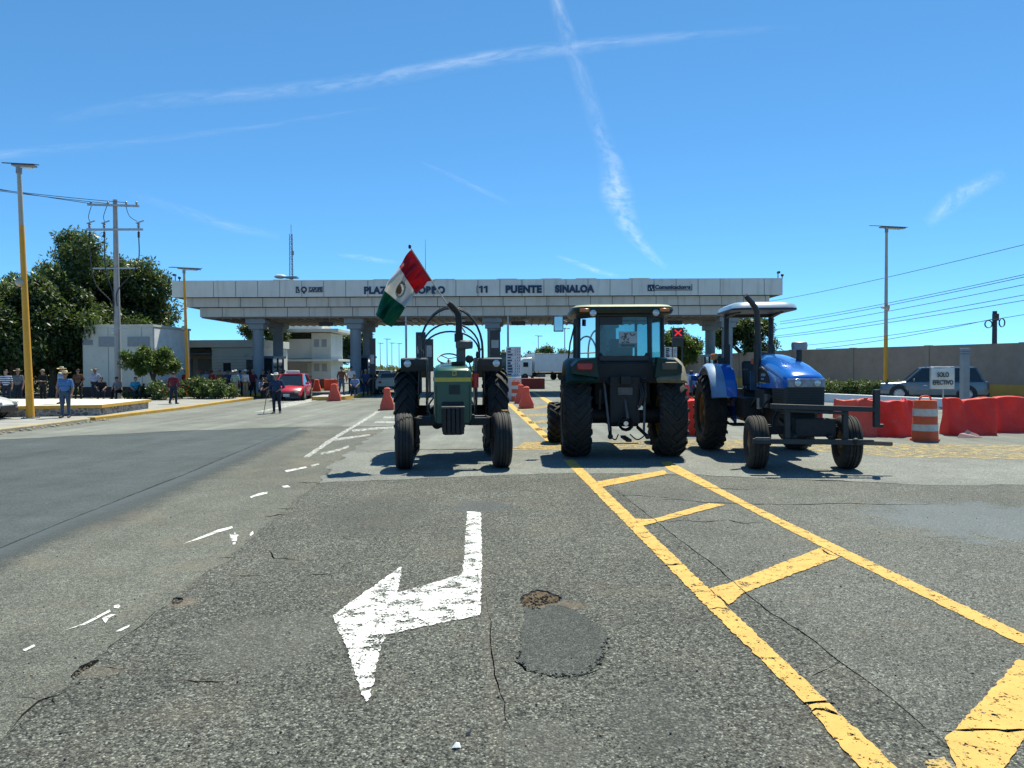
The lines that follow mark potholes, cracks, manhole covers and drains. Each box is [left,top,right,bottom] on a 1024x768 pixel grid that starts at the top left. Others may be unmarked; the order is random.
crack [9,691,67,731]
pothole [520,590,562,608]
crack [269,551,345,576]
pothole [71,659,99,681]
